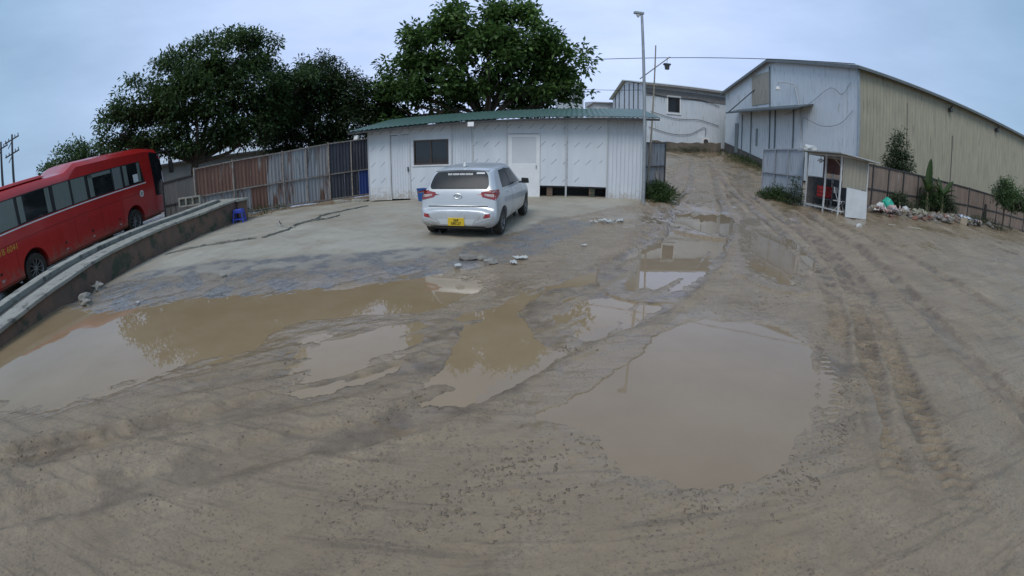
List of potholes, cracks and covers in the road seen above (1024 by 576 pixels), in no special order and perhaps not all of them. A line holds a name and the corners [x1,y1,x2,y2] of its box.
crack [164,205,368,255]
